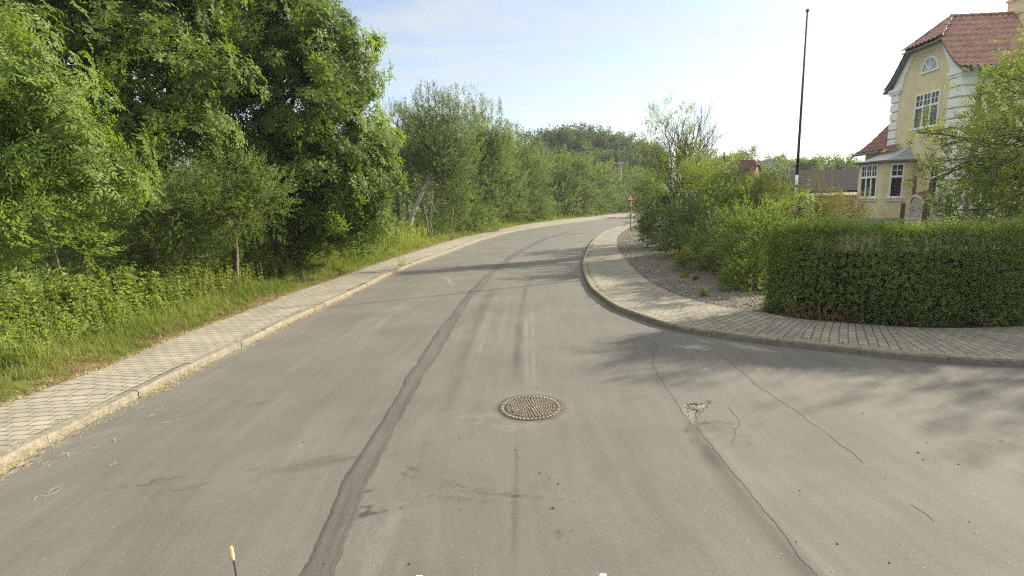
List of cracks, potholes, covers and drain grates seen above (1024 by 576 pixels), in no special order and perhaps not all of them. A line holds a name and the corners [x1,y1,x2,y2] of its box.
crack [714,352,862,462]
manhole cover [499,395,563,421]
crack [651,326,691,423]
pothole [681,399,718,431]
